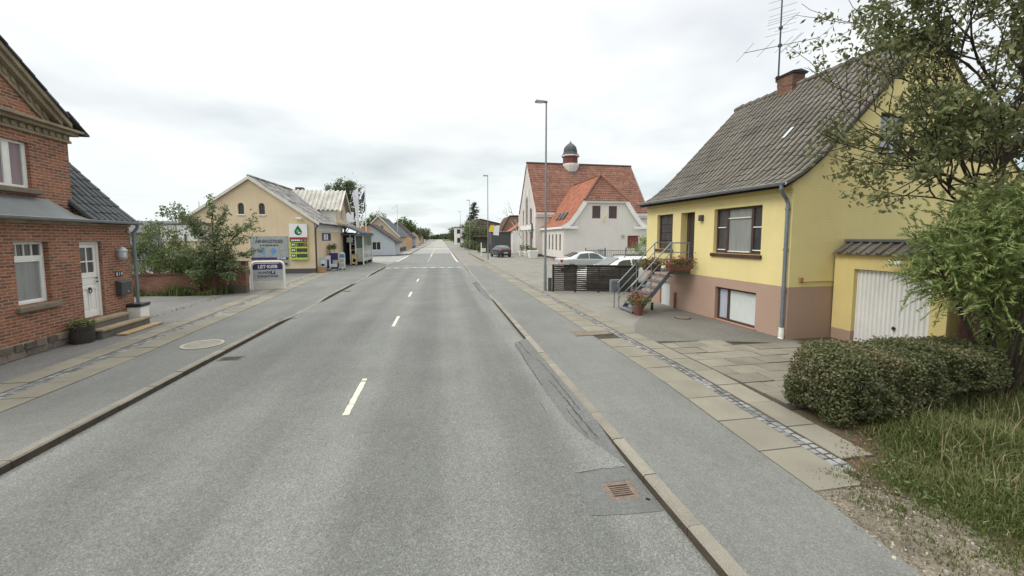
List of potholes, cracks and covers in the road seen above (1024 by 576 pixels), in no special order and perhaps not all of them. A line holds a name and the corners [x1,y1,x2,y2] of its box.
manhole cover [179,339,225,349]
crack [519,342,597,436]
drain grate [601,480,642,501]
